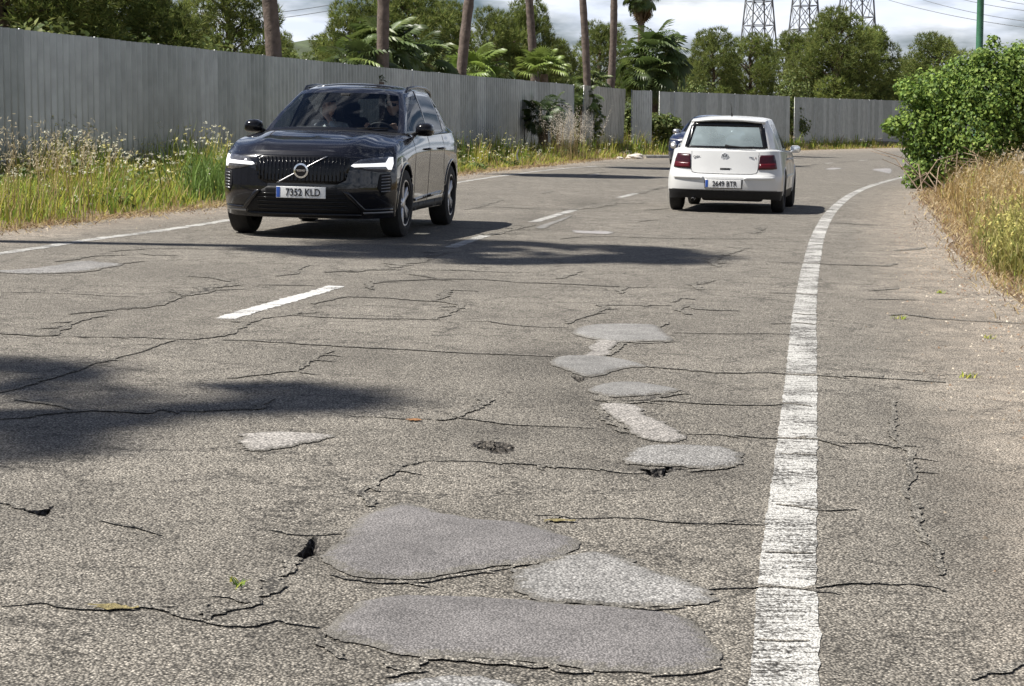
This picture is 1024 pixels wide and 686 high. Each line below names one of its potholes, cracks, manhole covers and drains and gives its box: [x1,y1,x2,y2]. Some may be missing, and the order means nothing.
crack [650,665,723,675]
crack [970,660,1024,679]
crack [686,401,946,593]
pothole [24,506,54,516]
pothole [470,440,515,454]
pothole [636,466,687,478]
pothole [296,536,321,561]
crack [98,519,161,534]
crack [329,550,588,586]
crack [381,655,593,676]
crack [352,365,945,432]
crack [772,247,928,266]
